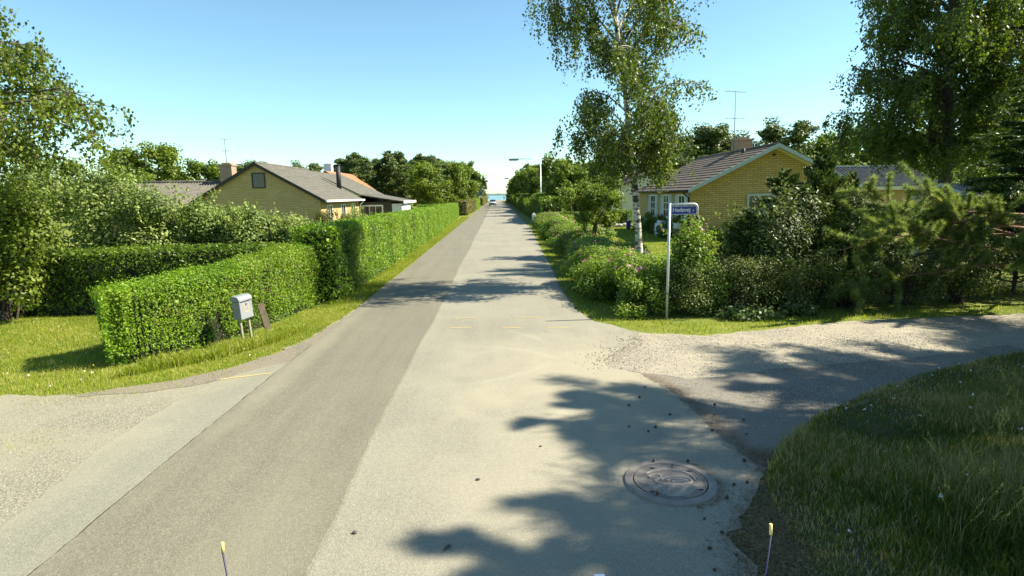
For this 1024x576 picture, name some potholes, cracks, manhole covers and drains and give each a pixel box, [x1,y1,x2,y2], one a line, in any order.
manhole cover [624,460,718,507]
